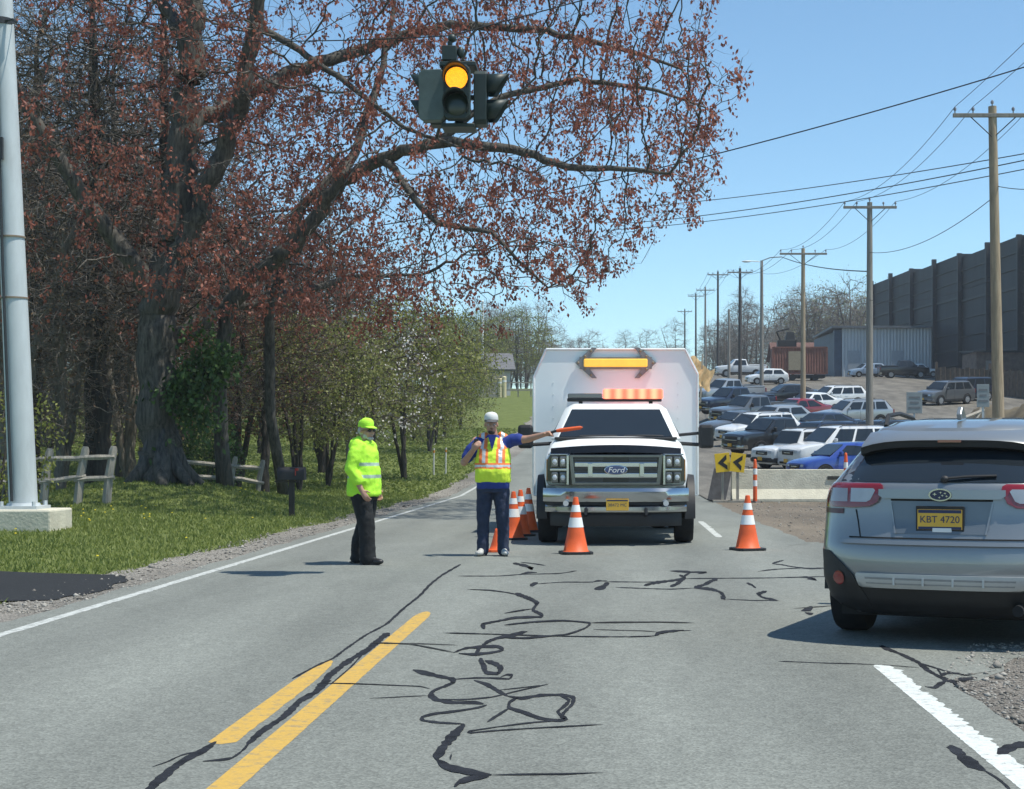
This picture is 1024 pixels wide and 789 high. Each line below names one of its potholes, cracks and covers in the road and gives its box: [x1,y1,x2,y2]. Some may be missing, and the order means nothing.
crack [595,622,691,637]
crack [530,560,824,601]
crack [781,645,977,691]
